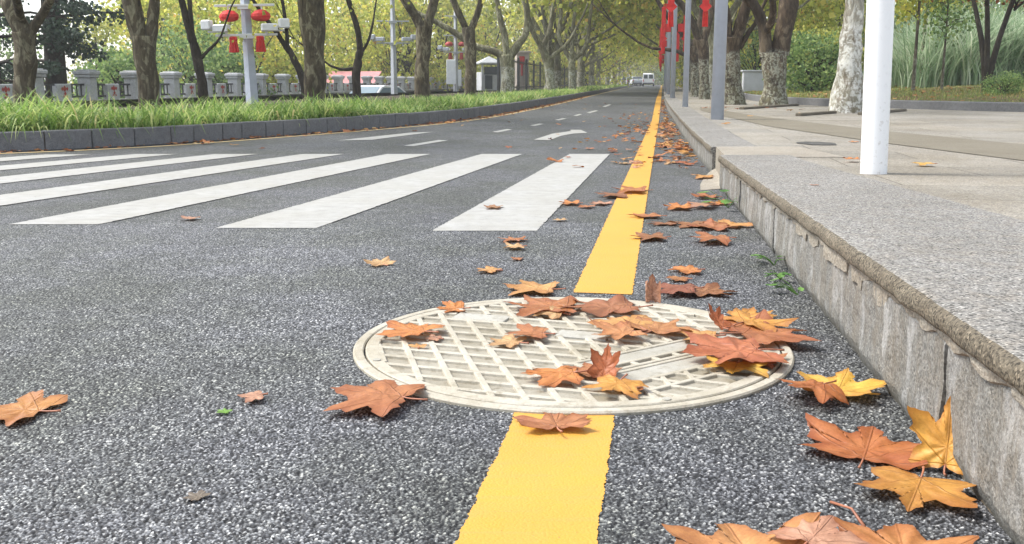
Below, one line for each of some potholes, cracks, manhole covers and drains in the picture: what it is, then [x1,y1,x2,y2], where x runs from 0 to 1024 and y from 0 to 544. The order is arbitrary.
manhole cover [353,297,794,416]
